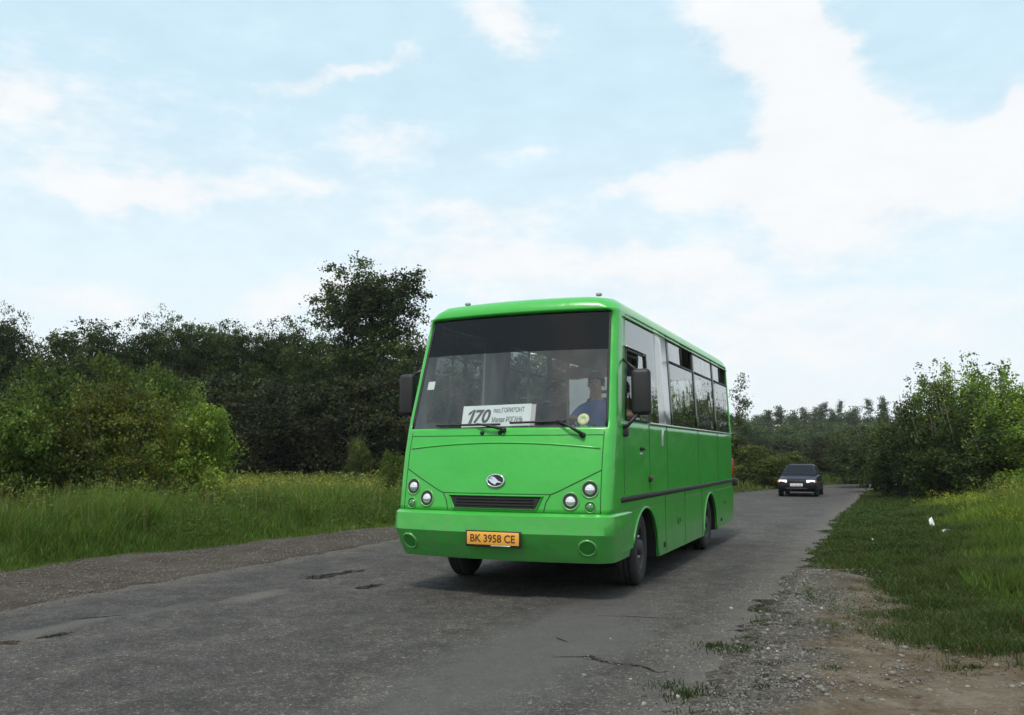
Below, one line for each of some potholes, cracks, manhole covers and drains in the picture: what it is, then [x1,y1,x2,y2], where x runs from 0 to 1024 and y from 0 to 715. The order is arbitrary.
crack [556,637,669,673]
pothole [304,569,368,579]
